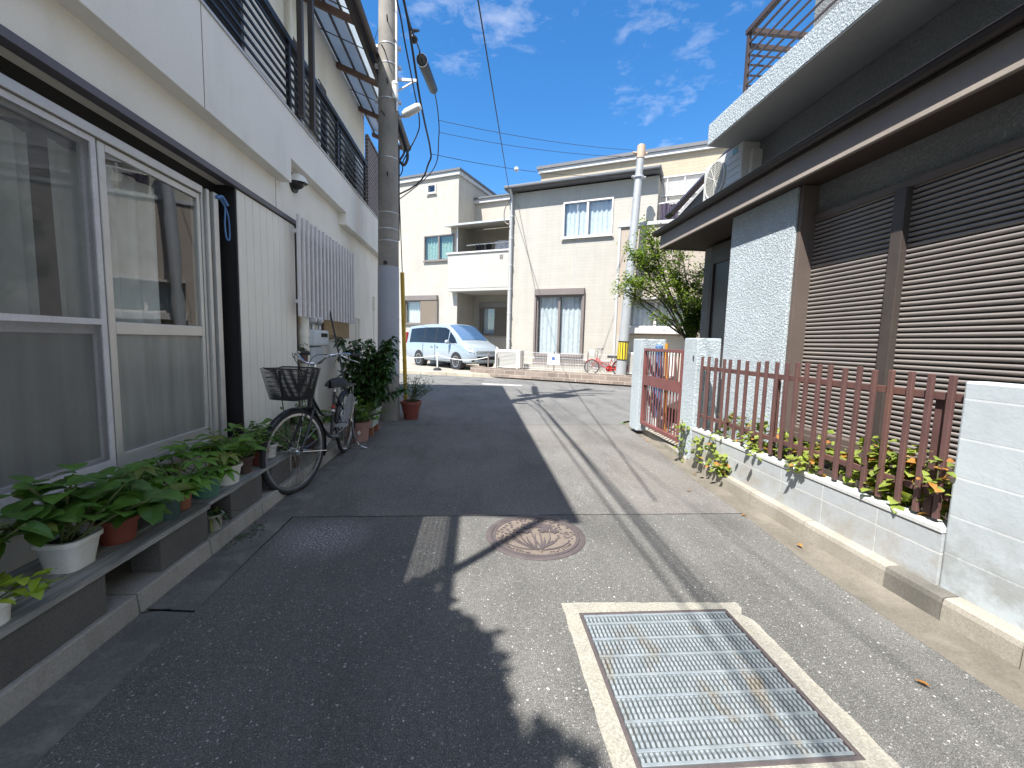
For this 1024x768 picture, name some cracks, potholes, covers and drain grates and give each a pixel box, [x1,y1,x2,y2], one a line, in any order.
drain grate [561,602,901,768]
manhole cover [486,515,585,561]
